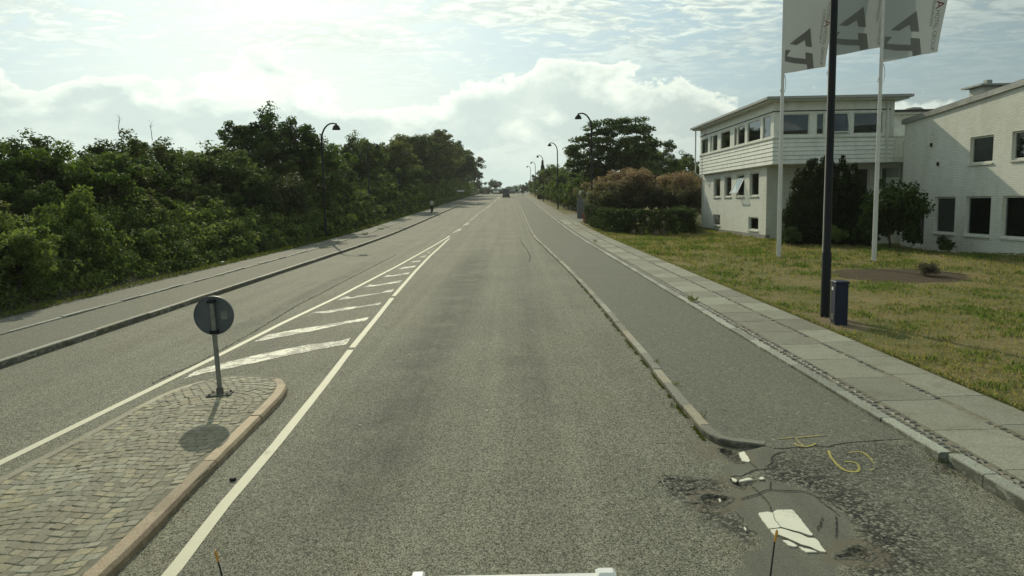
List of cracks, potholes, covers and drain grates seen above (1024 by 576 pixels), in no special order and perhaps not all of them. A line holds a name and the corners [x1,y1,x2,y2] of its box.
pothole [696,493,736,509]
pothole [830,544,879,563]
crack [658,451,923,573]
